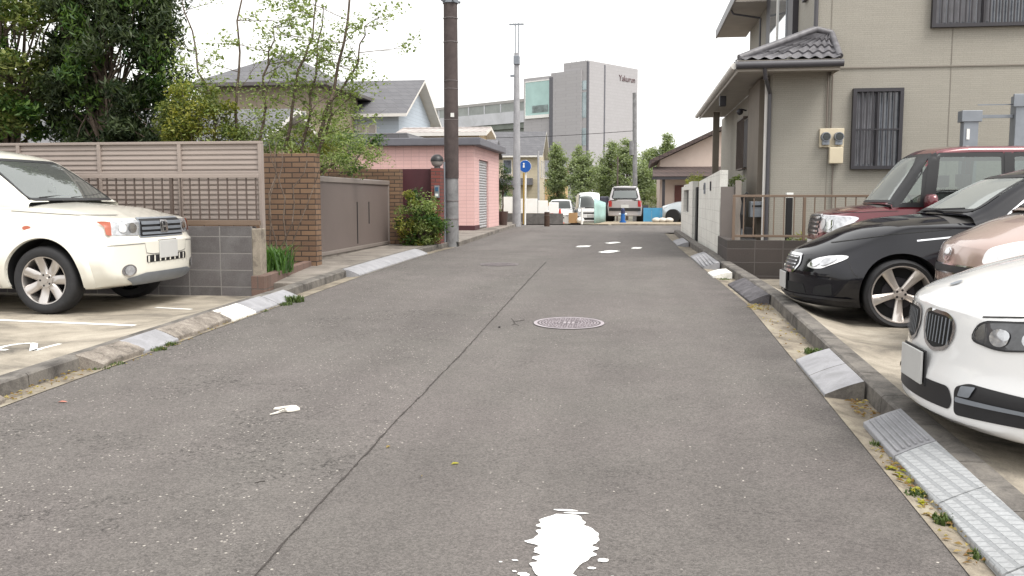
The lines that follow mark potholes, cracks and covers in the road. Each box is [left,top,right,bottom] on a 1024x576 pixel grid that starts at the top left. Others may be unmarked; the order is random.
manhole cover [533,317,605,329]
